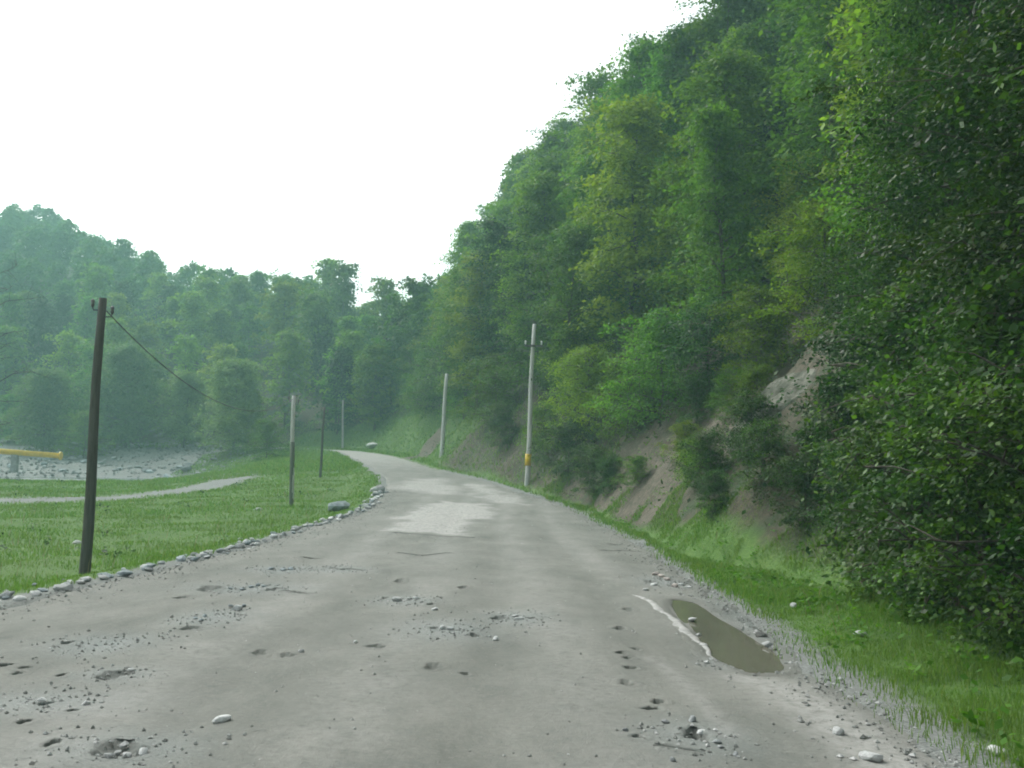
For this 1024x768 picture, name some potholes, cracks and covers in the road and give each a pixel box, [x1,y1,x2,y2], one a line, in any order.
crack [388,532,475,557]
pothole [658,598,802,677]
pothole [190,584,234,593]
pothole [74,734,168,761]
pothole [84,668,146,683]
crack [291,556,370,571]
